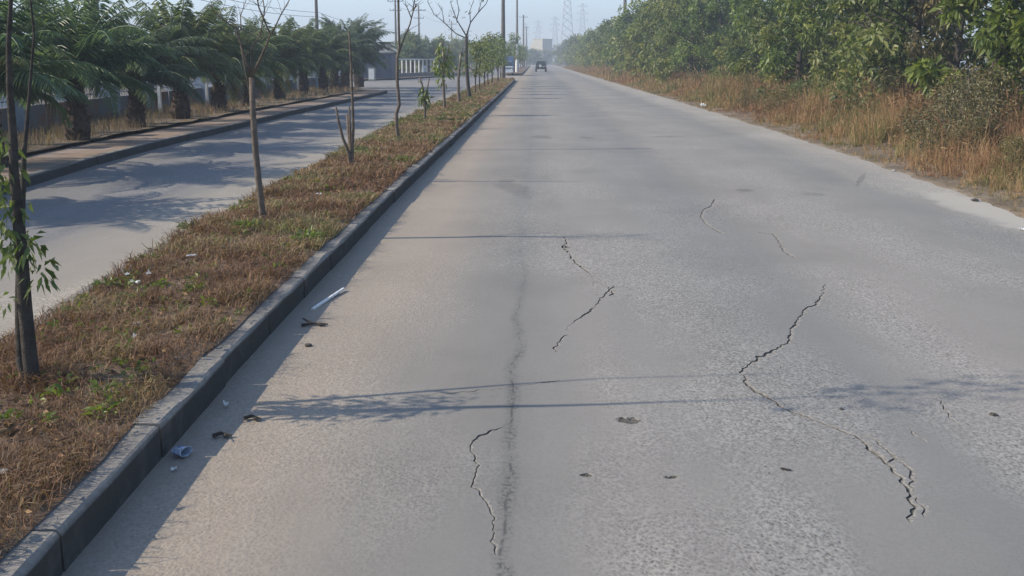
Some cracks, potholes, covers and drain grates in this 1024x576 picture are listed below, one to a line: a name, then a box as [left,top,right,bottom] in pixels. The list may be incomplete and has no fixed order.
crack [738,283,965,523]
crack [469,427,502,556]
crack [759,232,796,258]
crack [553,237,616,352]
crack [700,199,725,234]
